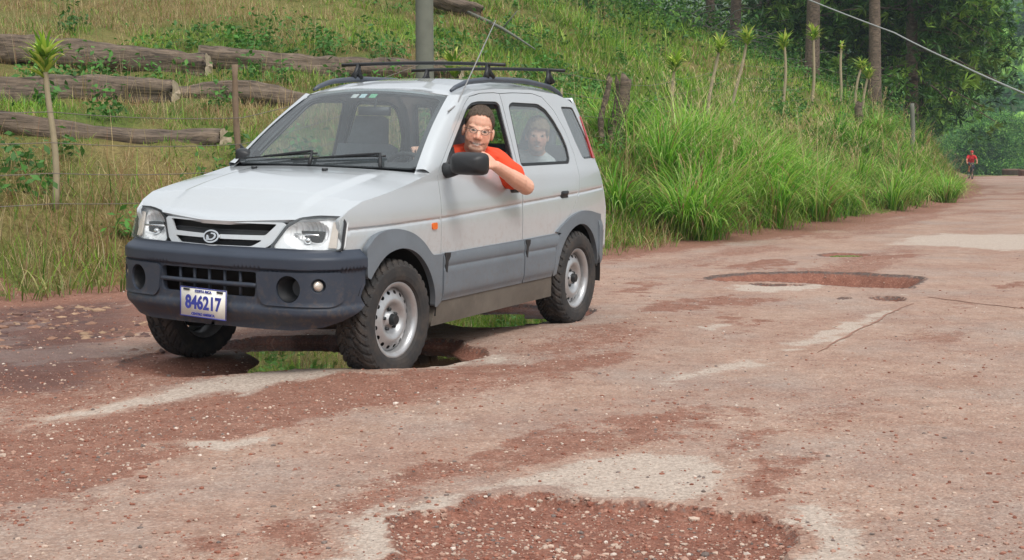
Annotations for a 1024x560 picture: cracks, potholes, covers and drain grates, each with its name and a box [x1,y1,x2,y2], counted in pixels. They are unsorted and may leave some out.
crack [817,303,914,353]
pothole [386,492,801,560]
pothole [115,335,490,377]
pothole [705,271,928,289]
